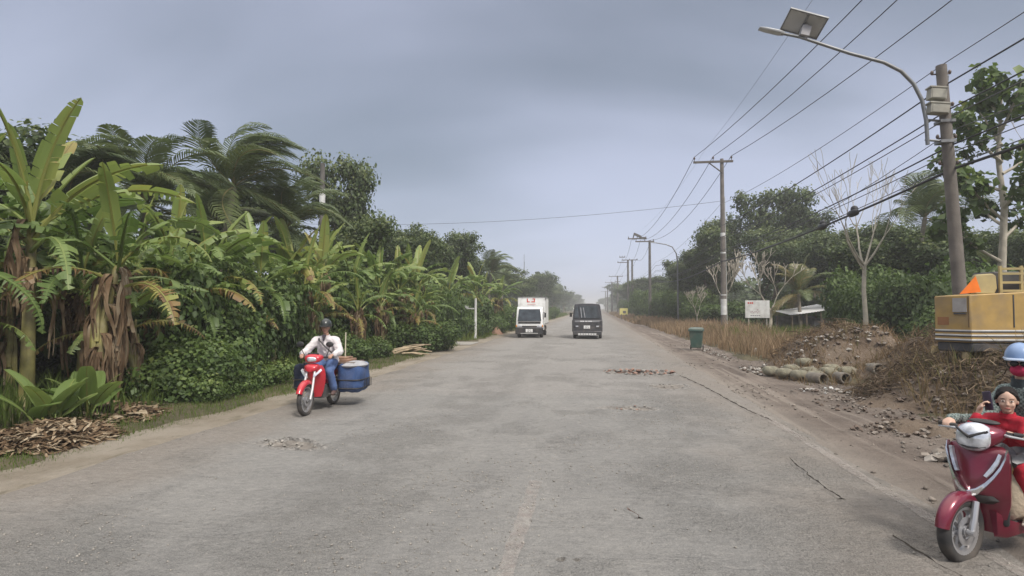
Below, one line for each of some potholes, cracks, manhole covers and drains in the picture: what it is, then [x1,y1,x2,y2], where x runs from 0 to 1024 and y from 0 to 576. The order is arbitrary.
pothole [252,436,330,451]
crack [623,507,644,519]
crack [677,375,773,421]
pothole [604,368,680,376]
crack [887,535,964,576]
crack [786,458,845,499]
